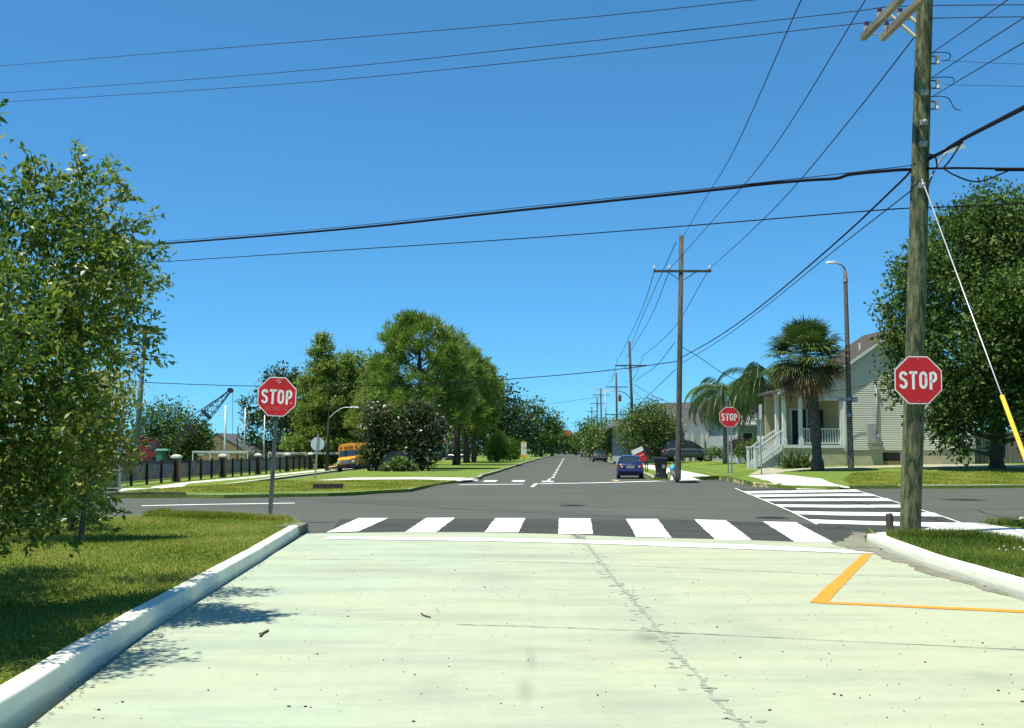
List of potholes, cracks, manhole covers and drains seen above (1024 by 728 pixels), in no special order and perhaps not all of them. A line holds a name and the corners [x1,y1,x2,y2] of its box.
crack [352,524,1024,728]
